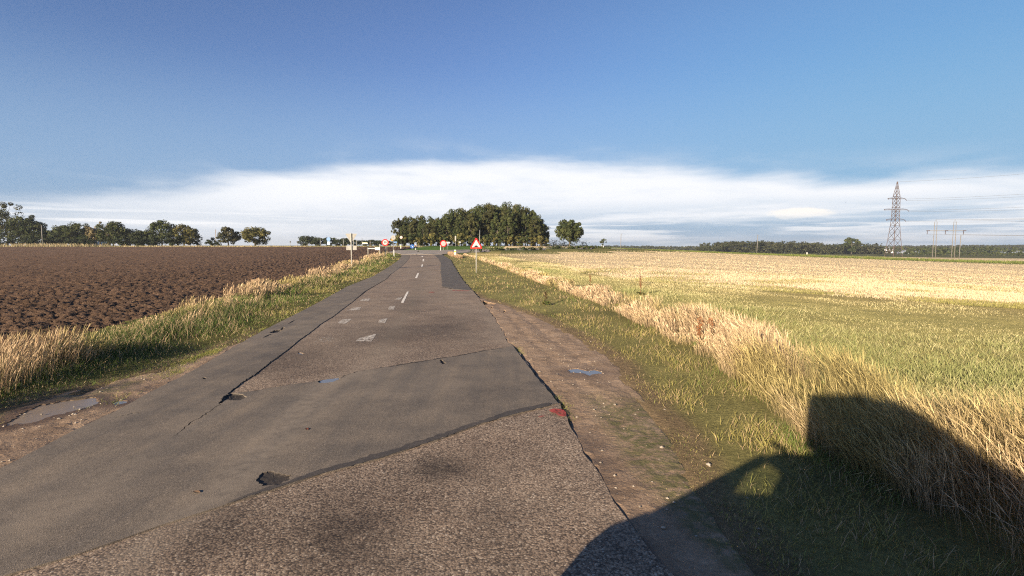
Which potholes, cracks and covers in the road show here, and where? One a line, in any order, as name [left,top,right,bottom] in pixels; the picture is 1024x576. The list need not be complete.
crack [184,281,383,429]
pothole [256,471,292,486]
pothole [219,394,245,403]
pothole [5,398,99,425]
